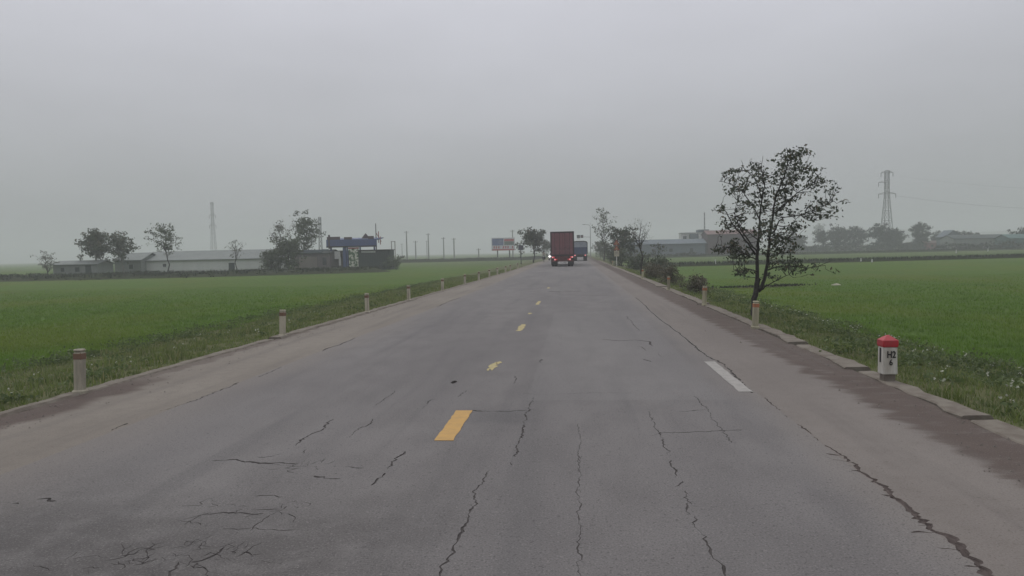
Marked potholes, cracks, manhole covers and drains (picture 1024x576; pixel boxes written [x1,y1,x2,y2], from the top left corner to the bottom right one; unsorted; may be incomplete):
crack [510,376,534,465]
crack [33,495,310,576]
crack [439,471,489,576]
crack [649,396,732,576]
crack [575,424,583,576]
crack [765,398,993,576]
crack [215,420,406,485]
